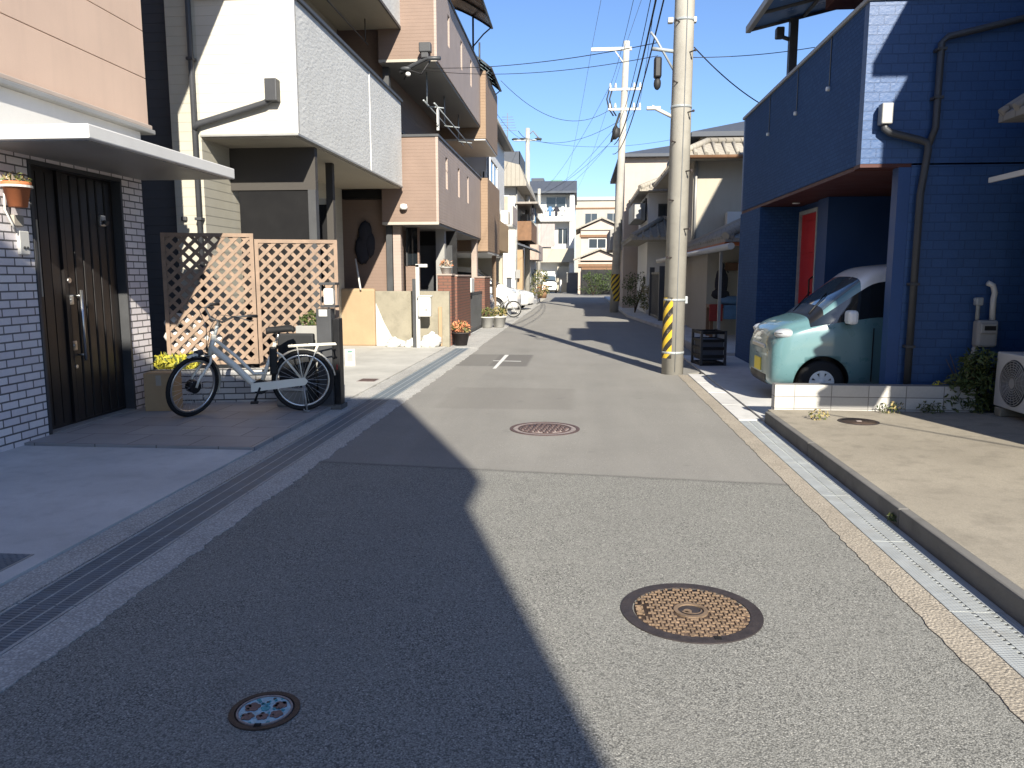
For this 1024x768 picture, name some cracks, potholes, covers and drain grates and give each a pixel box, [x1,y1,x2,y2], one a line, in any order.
manhole cover [228,691,300,731]
drain grate [334,404,382,419]
manhole cover [621,583,764,644]
manhole cover [510,422,580,436]
drain grate [17,536,180,607]
drain grate [379,383,416,393]
drain grate [0,604,75,656]
drain grate [209,461,297,493]
drain grate [133,492,248,538]
drain grate [263,437,332,461]
drain grate [303,419,361,438]
drain grate [360,393,401,405]
